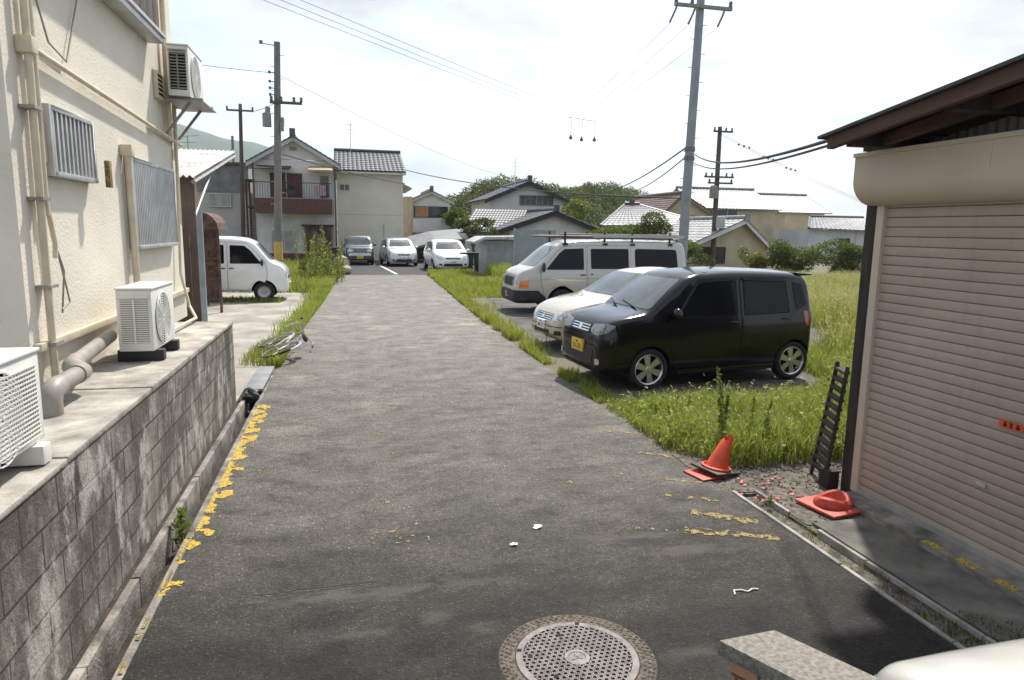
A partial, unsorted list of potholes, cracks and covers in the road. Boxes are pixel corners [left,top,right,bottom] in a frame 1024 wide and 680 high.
manhole cover [498,614,658,680]
